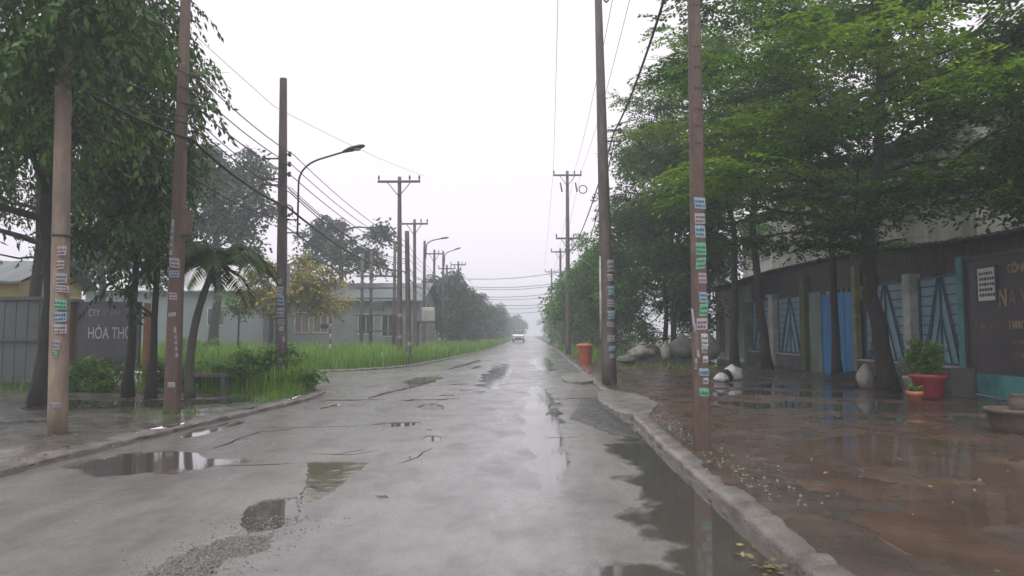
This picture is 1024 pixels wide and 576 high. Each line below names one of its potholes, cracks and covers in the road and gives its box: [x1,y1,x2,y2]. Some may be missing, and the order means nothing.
crack [318,360,482,409]
pothole [416,403,445,411]
crack [213,425,361,449]
pothole [145,531,278,576]
pothole [239,496,301,533]
